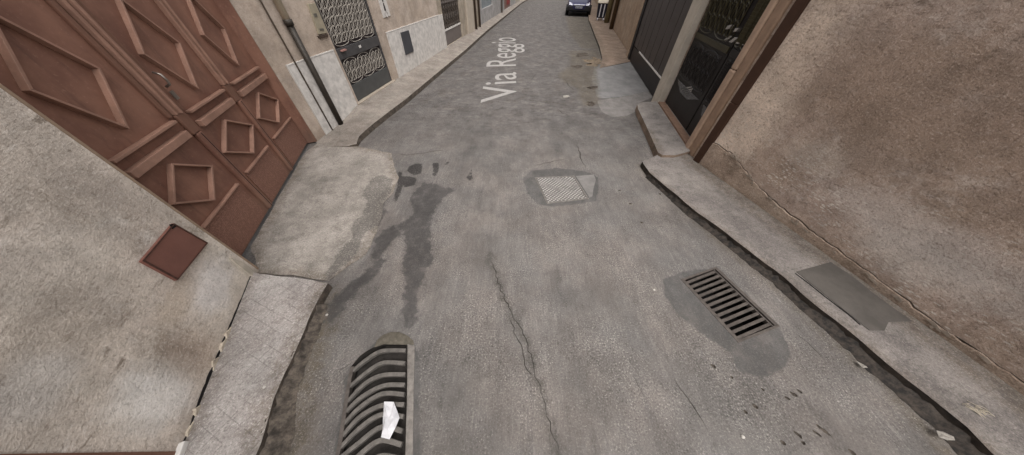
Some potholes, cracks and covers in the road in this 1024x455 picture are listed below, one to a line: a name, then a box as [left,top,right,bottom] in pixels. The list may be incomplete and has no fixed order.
utility cover [795,262,911,331]
crack [491,262,559,449]
drain grate [681,267,780,343]
drain grate [335,332,415,455]
